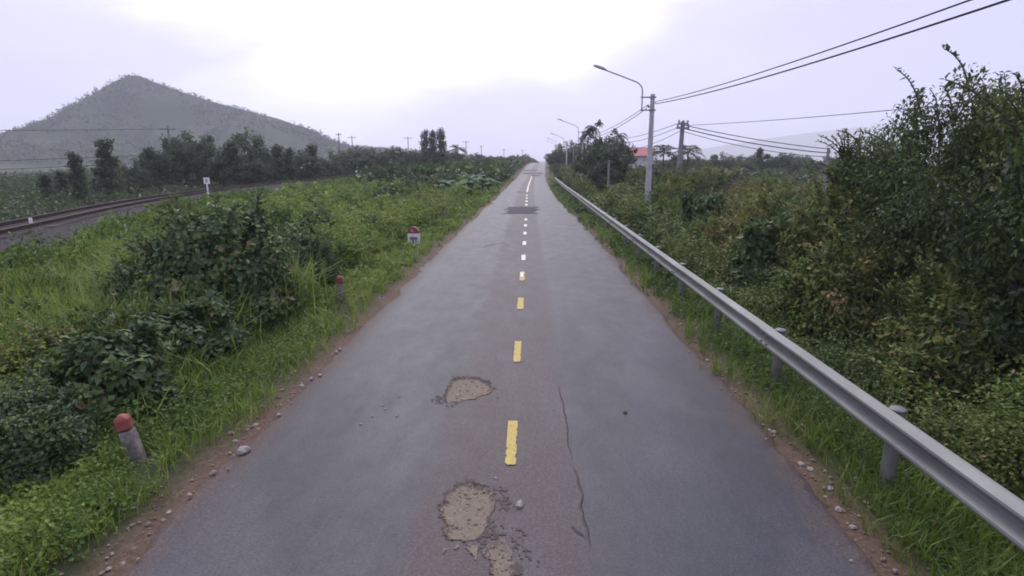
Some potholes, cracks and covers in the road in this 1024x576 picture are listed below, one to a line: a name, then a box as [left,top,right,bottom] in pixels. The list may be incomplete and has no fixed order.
pothole [477,527,540,576]
pothole [431,376,499,407]
pothole [438,479,514,543]
crack [558,387,590,551]
